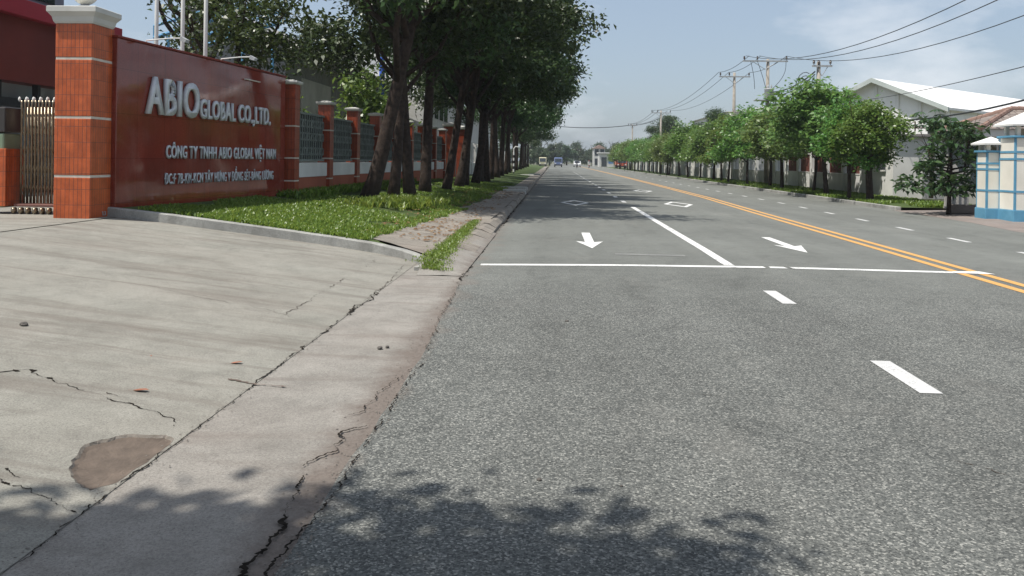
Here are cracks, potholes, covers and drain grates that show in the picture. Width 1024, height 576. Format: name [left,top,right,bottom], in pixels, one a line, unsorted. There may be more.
crack [1,468,76,512]
crack [2,369,177,426]
crack [237,364,423,576]
